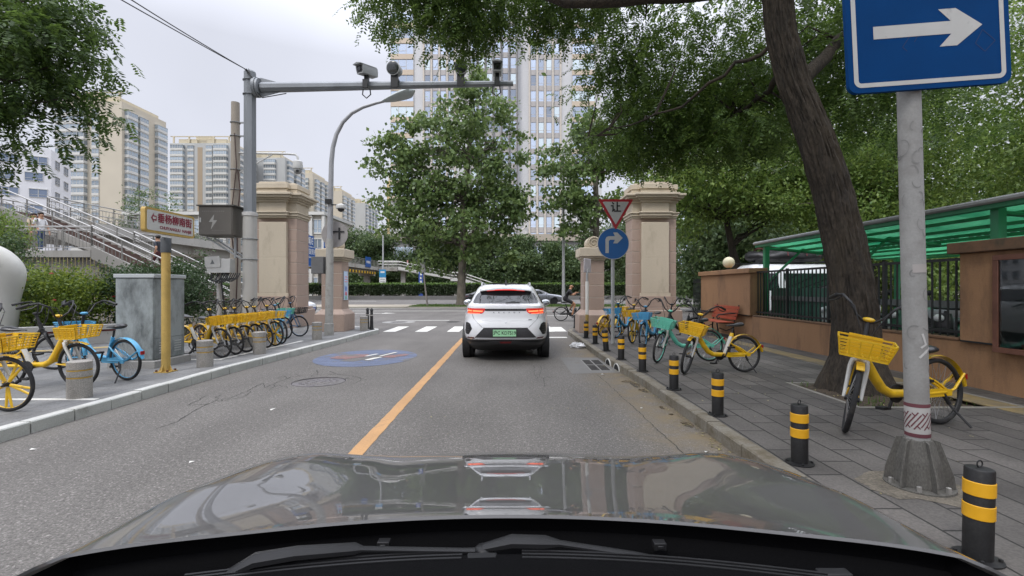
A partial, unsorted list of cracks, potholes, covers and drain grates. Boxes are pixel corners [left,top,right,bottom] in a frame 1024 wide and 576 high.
manhole cover [290,377,346,387]
drain grate [581,360,613,371]
crack [159,371,366,428]
